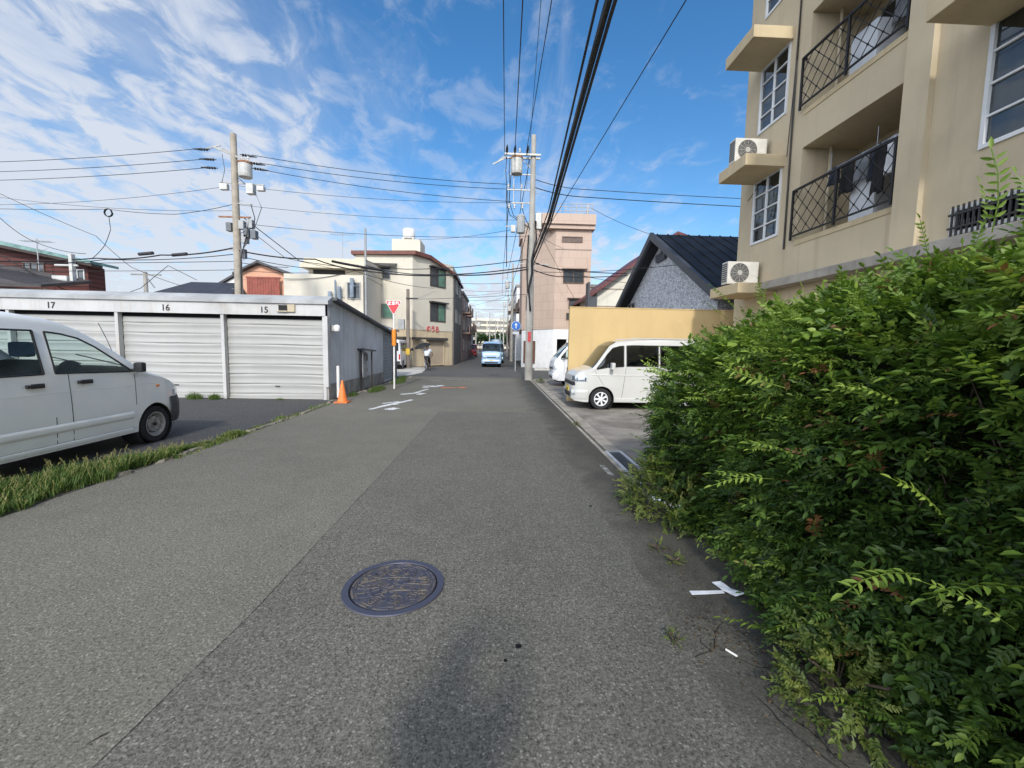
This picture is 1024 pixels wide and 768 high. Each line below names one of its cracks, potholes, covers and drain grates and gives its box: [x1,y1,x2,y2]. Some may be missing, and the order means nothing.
manhole cover [341,560,444,617]
drain grate [605,451,643,475]
crack [734,656,850,768]
